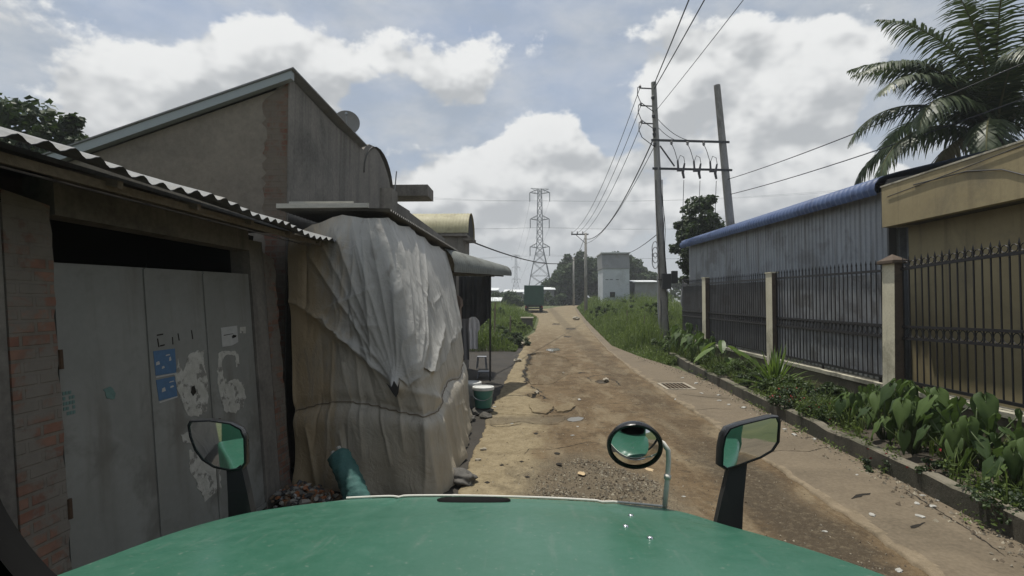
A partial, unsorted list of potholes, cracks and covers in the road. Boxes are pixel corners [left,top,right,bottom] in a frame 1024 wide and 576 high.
crack [509,352,575,415]
drain grate [657,382,696,390]
